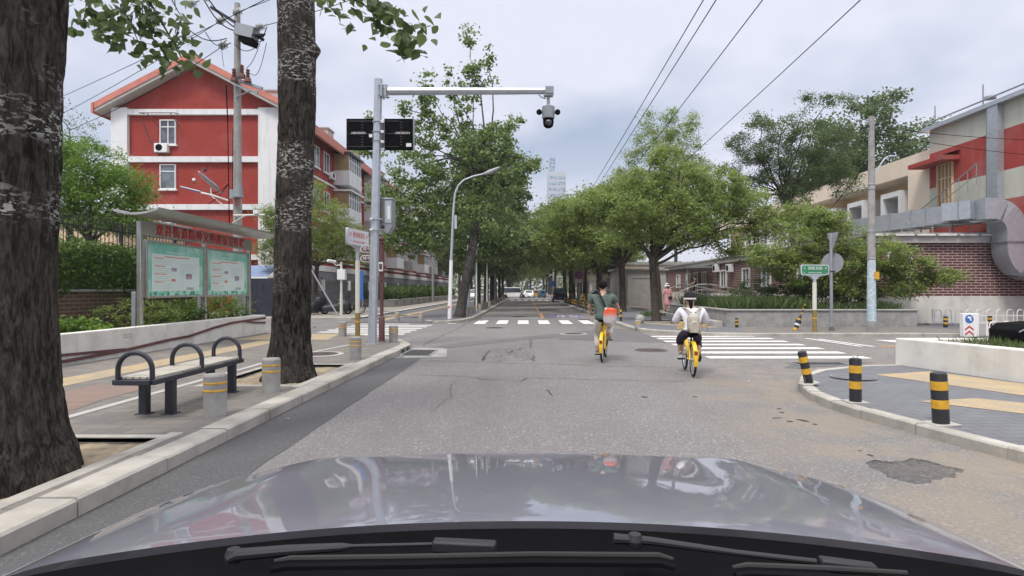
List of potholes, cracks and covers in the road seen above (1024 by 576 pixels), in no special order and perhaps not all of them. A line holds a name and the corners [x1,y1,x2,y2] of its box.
crack [418,321,669,420]
